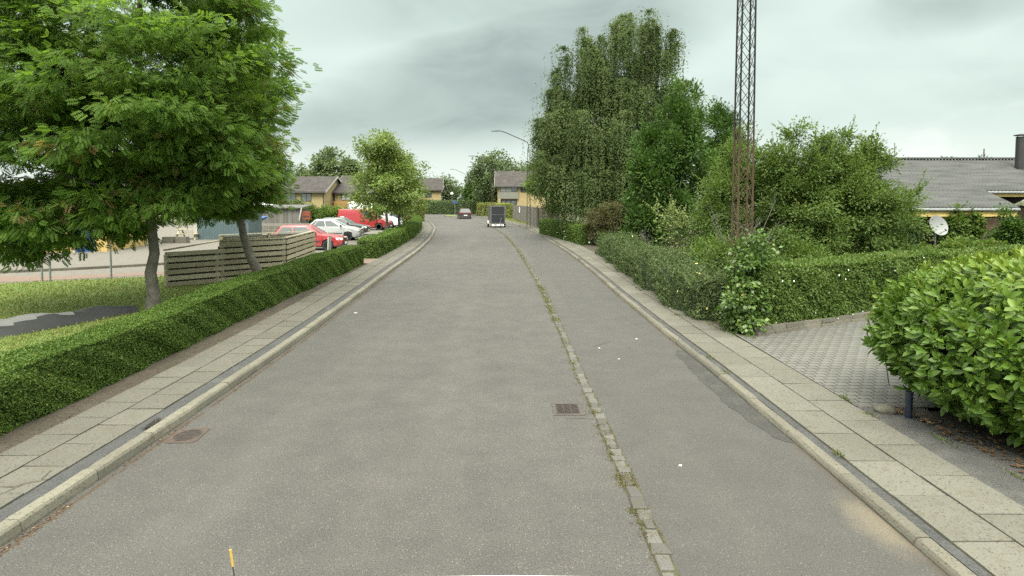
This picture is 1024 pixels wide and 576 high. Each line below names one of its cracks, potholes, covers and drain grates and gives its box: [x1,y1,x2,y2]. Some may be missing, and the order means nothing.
drain grate [552,403,586,416]
manhole cover [164,427,210,444]
